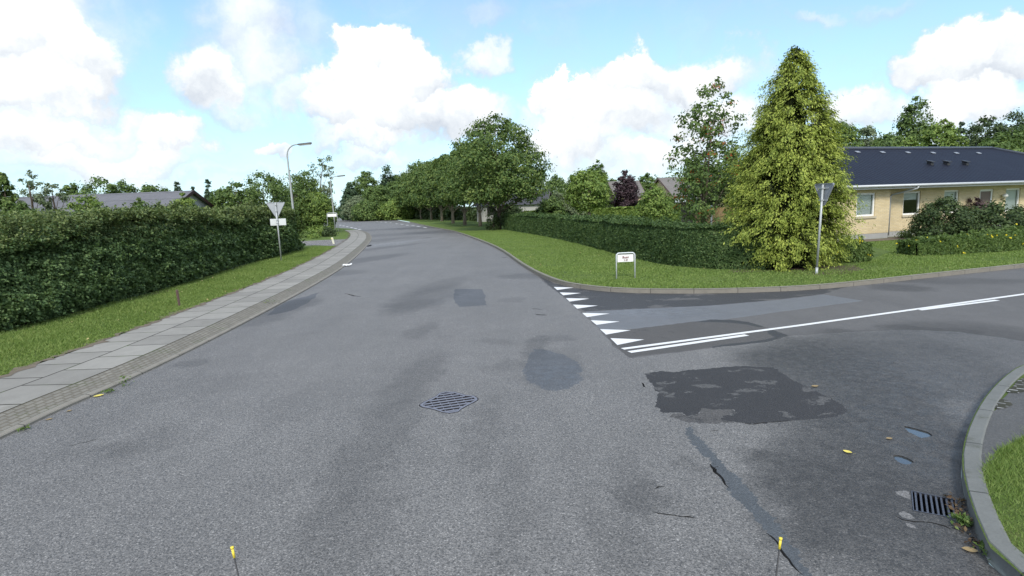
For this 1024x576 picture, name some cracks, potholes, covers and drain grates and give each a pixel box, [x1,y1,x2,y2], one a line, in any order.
crack [710,464,729,488]
drain grate [911,491,959,519]
manhole cover [419,391,478,414]
pothole [904,426,932,438]
pothole [893,455,913,464]
